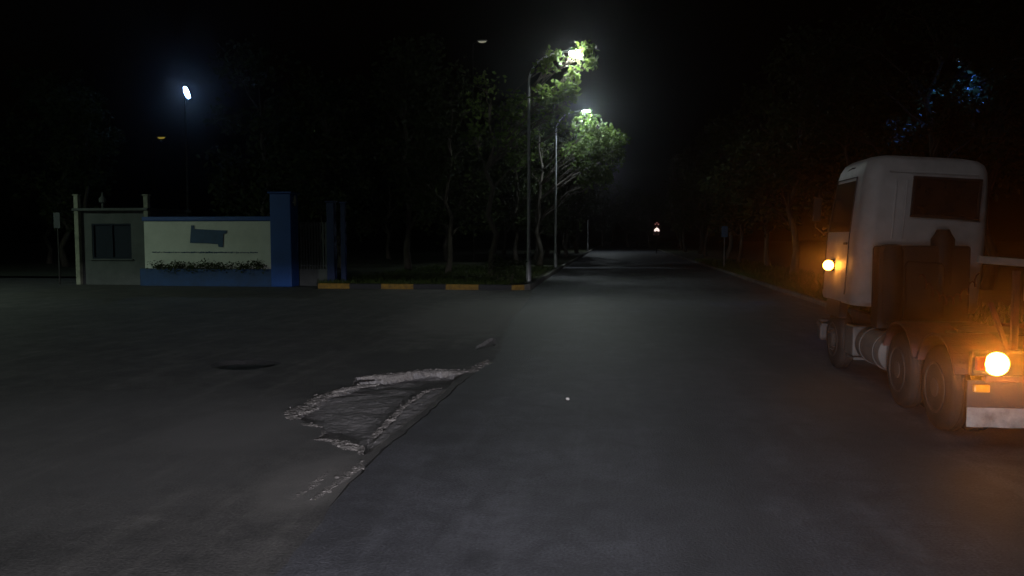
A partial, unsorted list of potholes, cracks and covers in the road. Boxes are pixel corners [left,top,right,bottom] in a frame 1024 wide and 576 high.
pothole [283,360,494,456]
